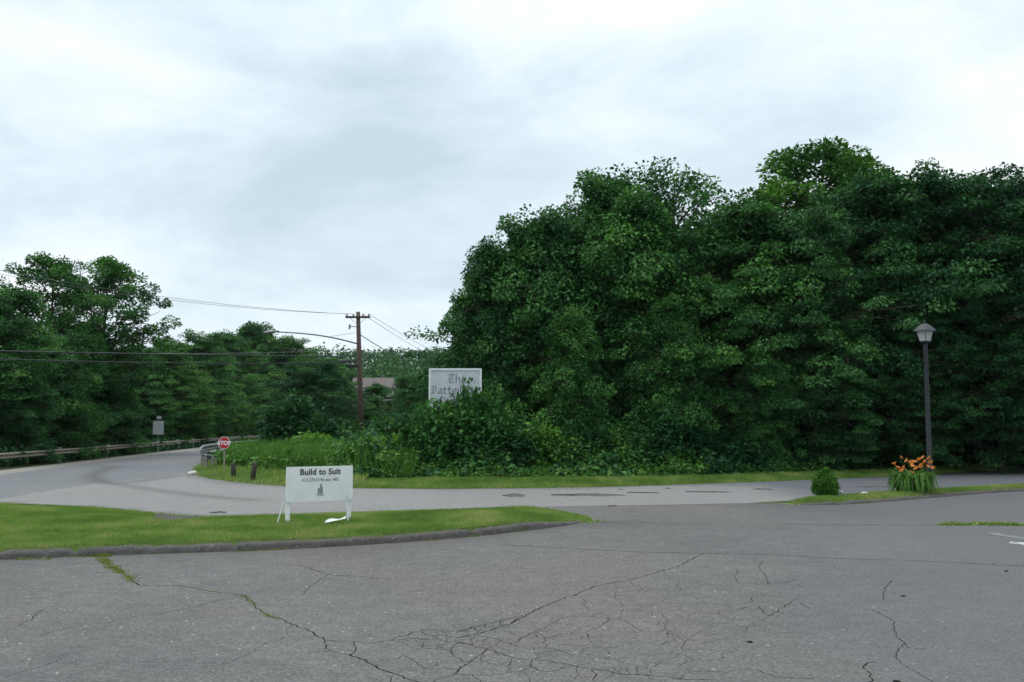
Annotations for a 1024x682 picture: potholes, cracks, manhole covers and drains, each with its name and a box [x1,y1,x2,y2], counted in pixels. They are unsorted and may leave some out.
crack [868,581,933,682]
crack [312,553,804,682]
crack [38,580,325,666]
crack [506,531,1014,635]
